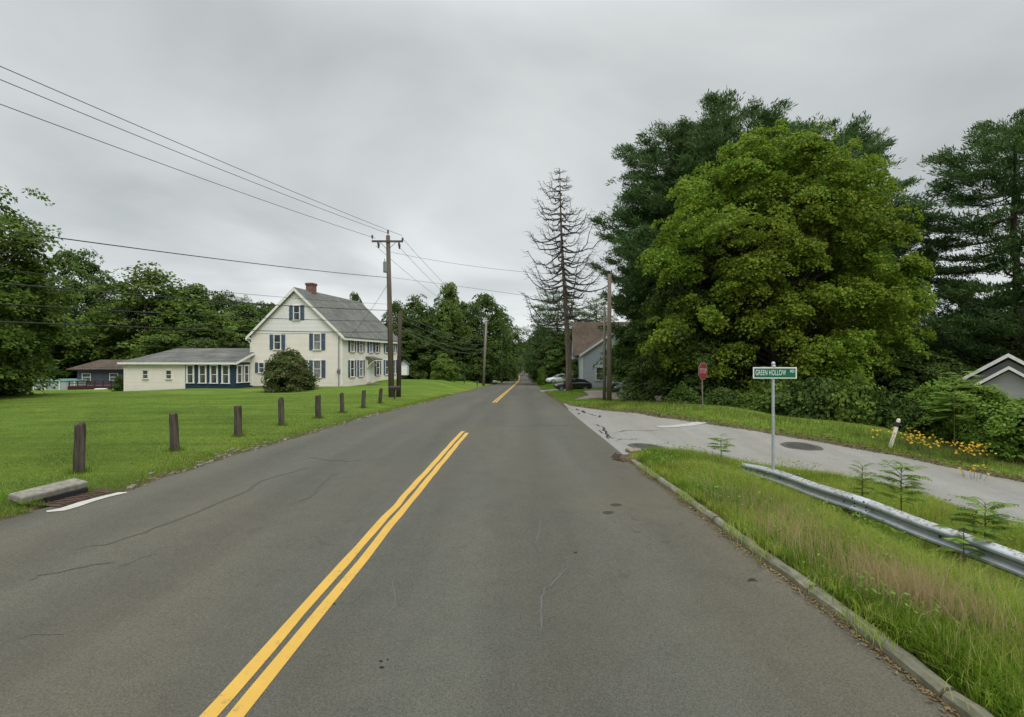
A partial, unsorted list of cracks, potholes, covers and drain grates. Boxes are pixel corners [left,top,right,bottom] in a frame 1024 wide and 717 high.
manhole cover [780,442,824,451]
crack [534,517,573,638]
crack [576,409,652,440]
drain grate [8,478,117,507]
crack [31,552,161,585]
